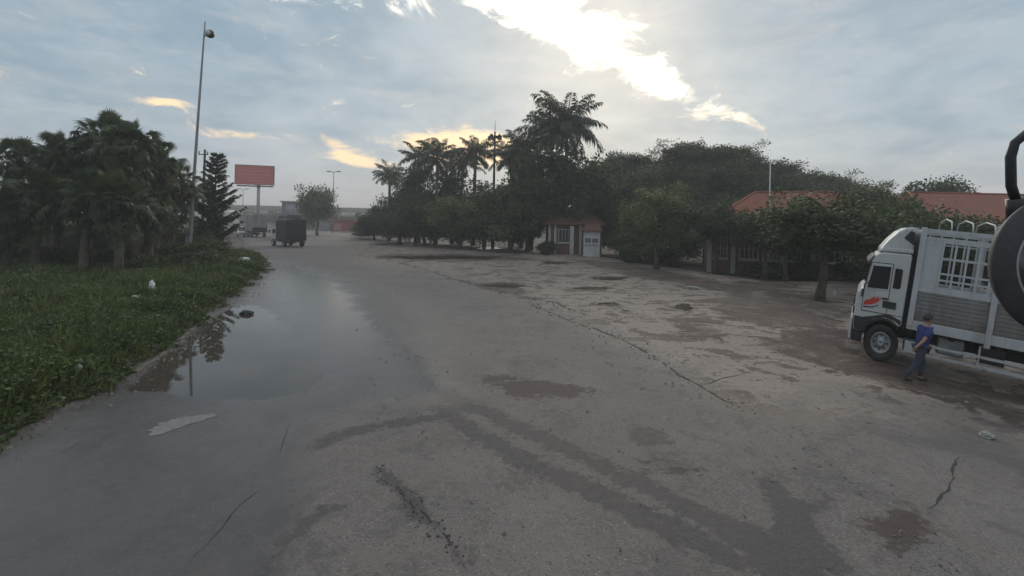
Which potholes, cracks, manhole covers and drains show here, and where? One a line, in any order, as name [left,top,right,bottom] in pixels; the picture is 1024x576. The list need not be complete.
crack [524,302,753,411]
crack [182,491,257,557]
crack [930,456,960,508]
